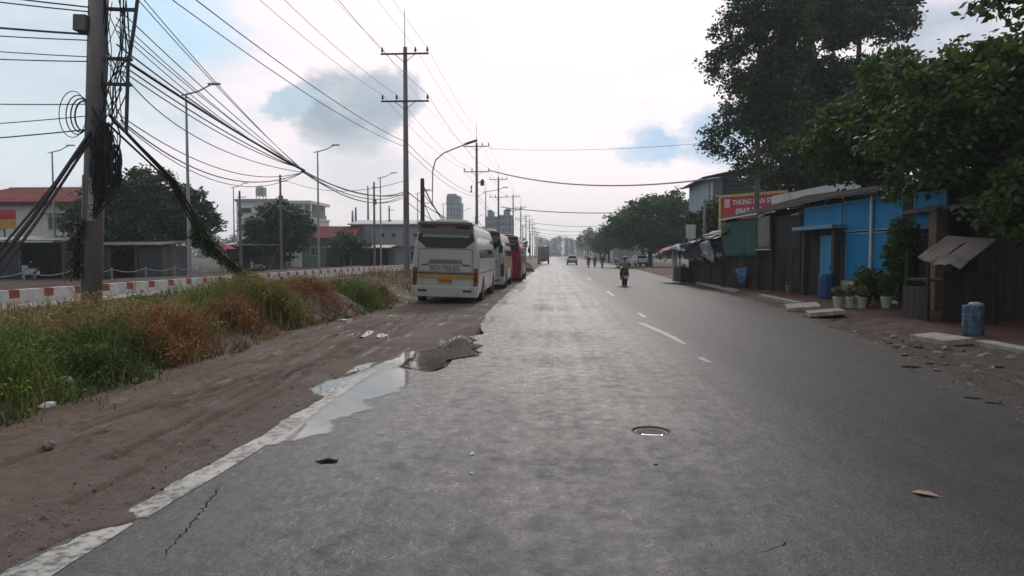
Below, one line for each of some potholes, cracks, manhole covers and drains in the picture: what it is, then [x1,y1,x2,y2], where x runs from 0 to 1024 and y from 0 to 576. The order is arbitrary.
pothole [404,335,481,372]
crack [160,484,220,561]
manhole cover [631,426,671,436]
